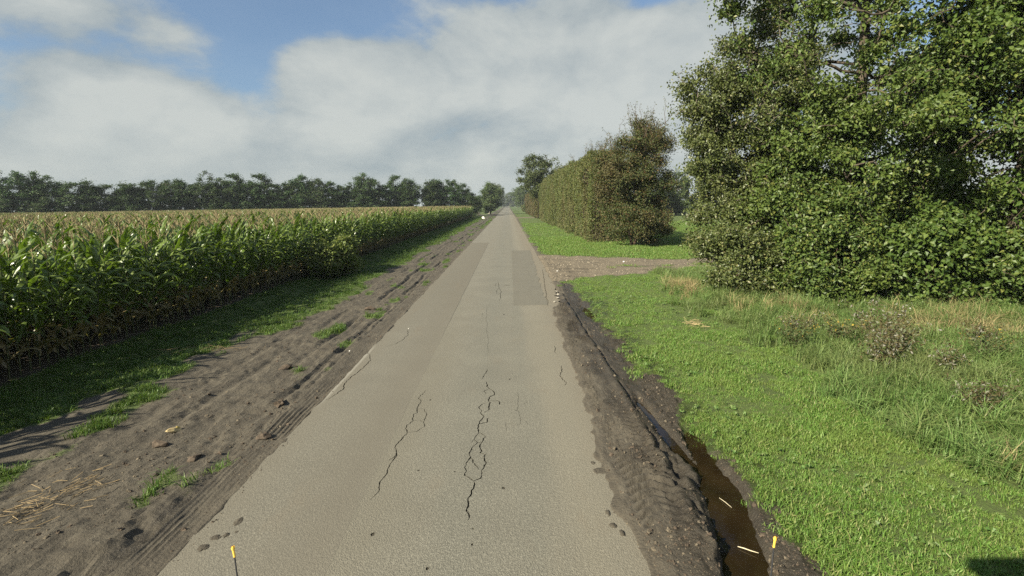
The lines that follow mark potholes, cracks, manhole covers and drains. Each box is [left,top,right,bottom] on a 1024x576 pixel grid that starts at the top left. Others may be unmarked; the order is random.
crack [375,392,427,495]
crack [466,375,525,518]
